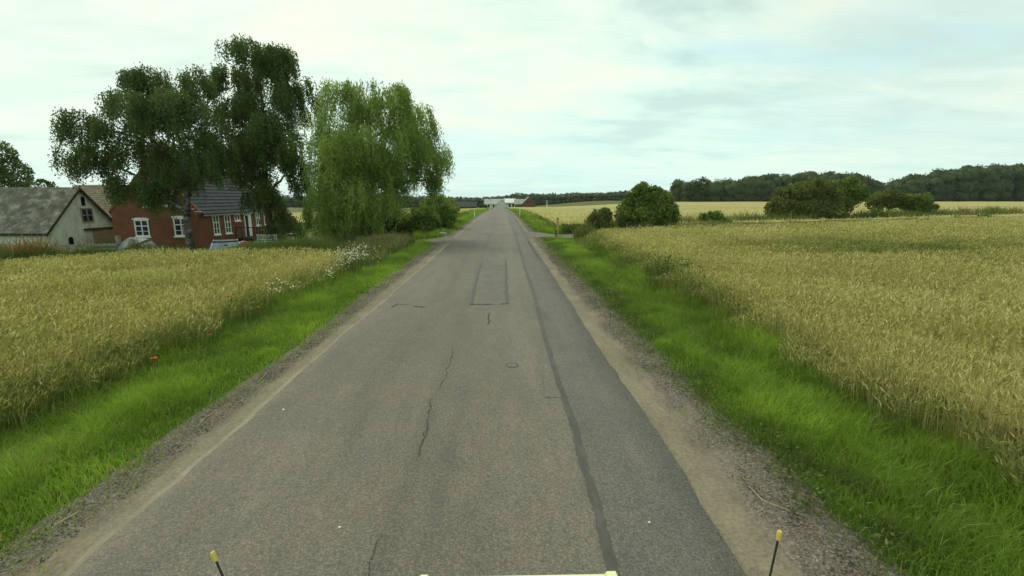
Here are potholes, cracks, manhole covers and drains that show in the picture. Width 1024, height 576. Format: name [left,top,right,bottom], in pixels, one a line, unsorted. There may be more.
crack [368,350,453,576]
